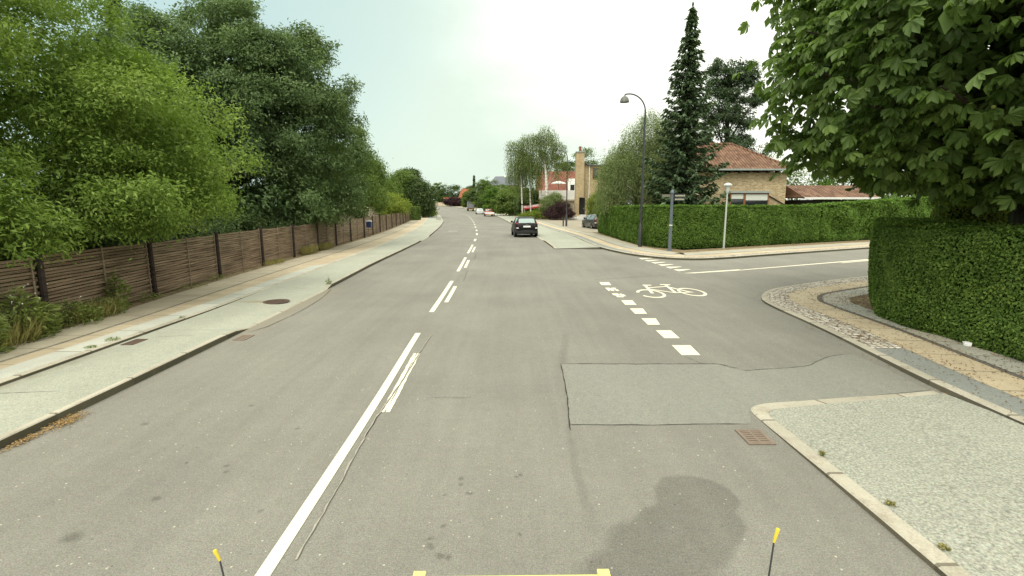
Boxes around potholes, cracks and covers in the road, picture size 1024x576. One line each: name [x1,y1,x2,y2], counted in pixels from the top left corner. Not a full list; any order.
crack [295,335,431,560]
drain grate [735,429,776,445]
